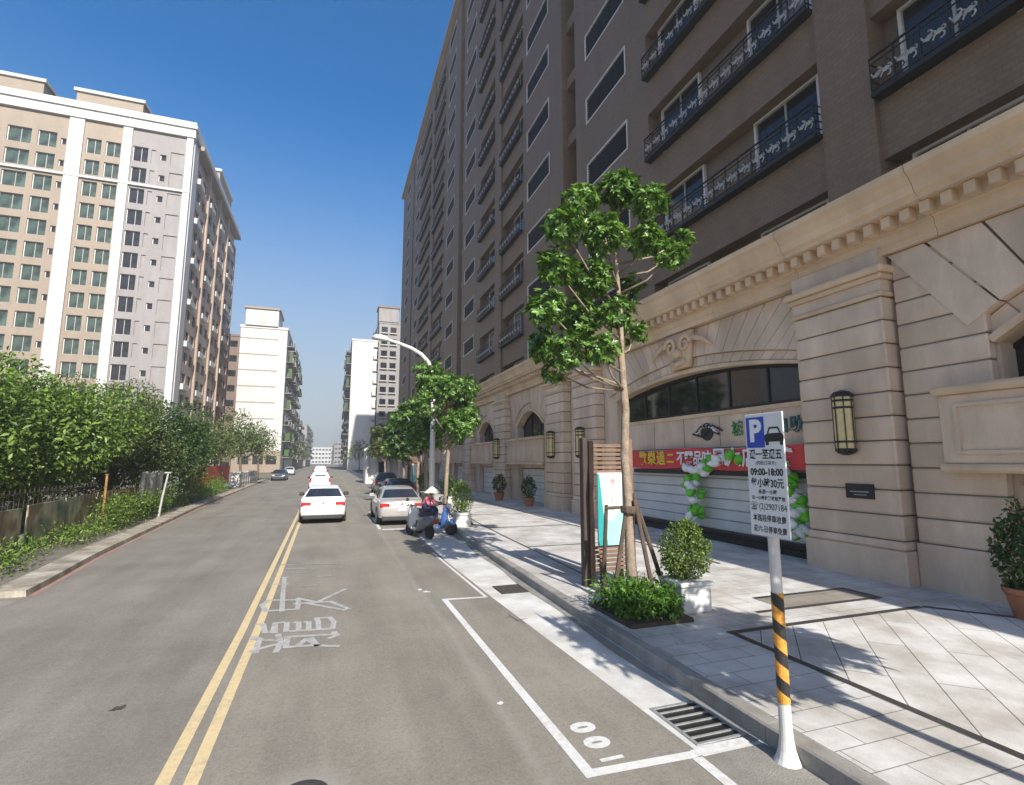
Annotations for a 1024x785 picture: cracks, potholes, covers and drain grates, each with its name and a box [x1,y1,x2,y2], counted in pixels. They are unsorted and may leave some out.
drain grate [650,700,746,746]
